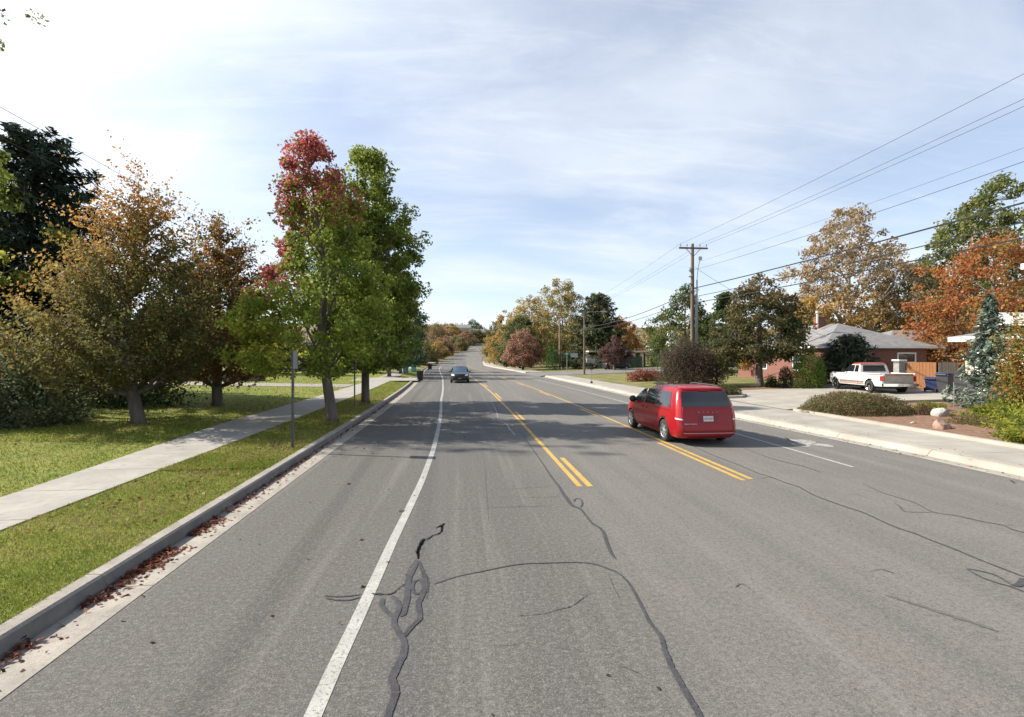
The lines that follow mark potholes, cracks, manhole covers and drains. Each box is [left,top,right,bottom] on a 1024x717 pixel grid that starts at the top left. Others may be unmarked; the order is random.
crack [372,561,429,604]
crack [517,575,619,616]
